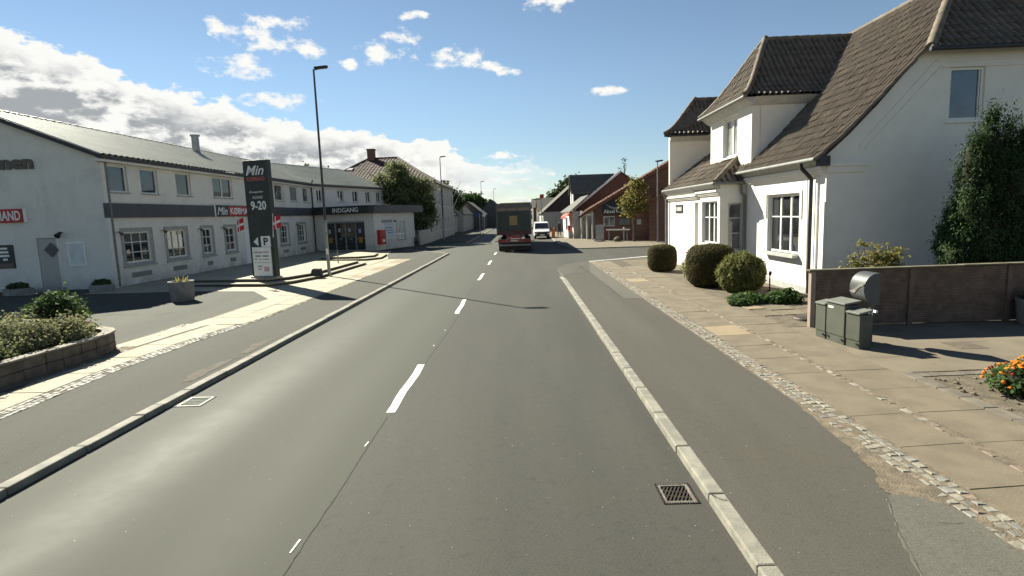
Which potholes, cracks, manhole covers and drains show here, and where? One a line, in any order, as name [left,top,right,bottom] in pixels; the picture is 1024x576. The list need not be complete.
crack [886,495,923,576]
